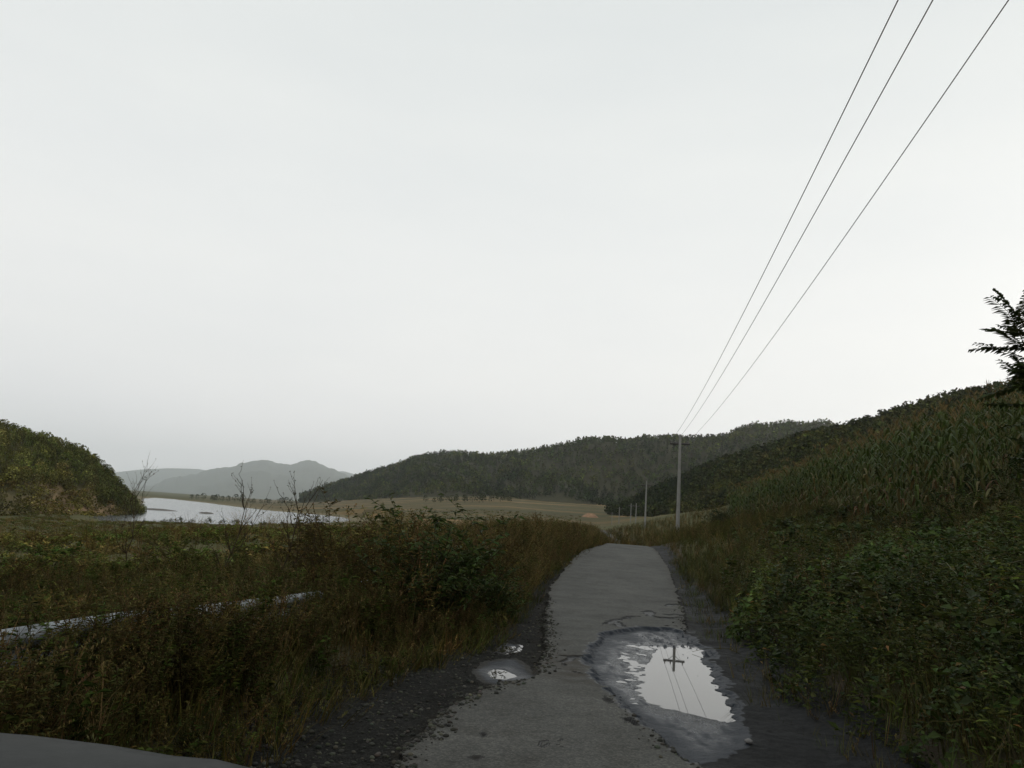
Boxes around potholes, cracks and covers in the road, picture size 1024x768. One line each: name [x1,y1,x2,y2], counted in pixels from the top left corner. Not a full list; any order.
pothole [492,643,522,655]
crack [602,604,702,634]
